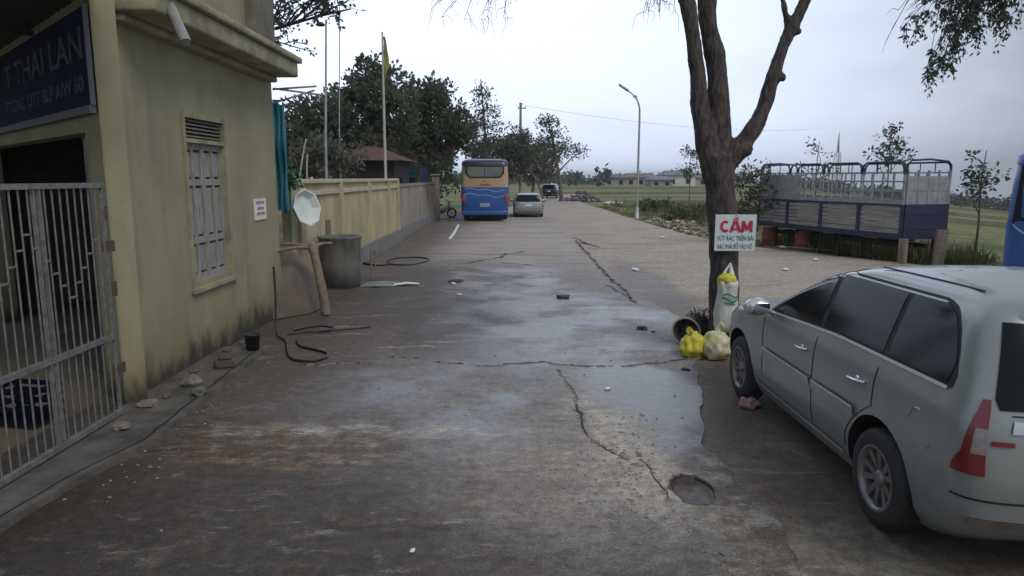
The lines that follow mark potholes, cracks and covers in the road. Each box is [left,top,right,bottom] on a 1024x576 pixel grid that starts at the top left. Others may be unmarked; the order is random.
pothole [668,473,717,506]
crack [458,251,534,266]
crack [302,356,703,502]
